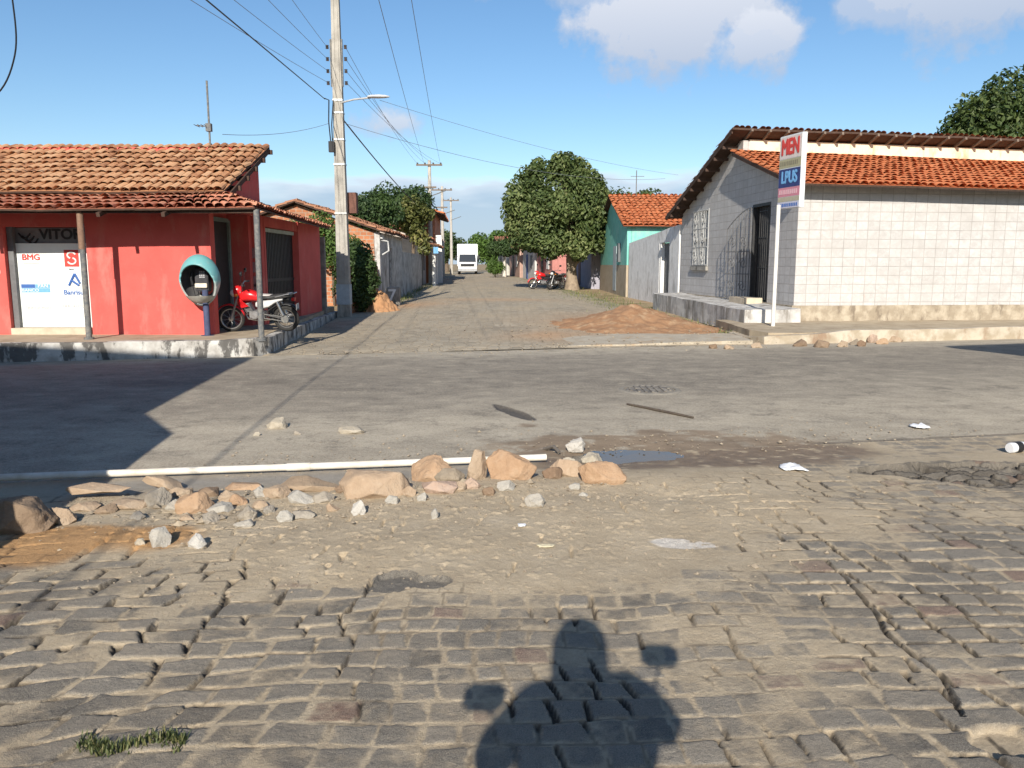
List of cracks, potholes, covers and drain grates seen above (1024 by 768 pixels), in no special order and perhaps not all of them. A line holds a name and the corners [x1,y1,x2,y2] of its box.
pothole [365,570,452,593]
pothole [850,460,1024,488]
crack [840,573,967,717]
manhole cover [618,385,682,395]
